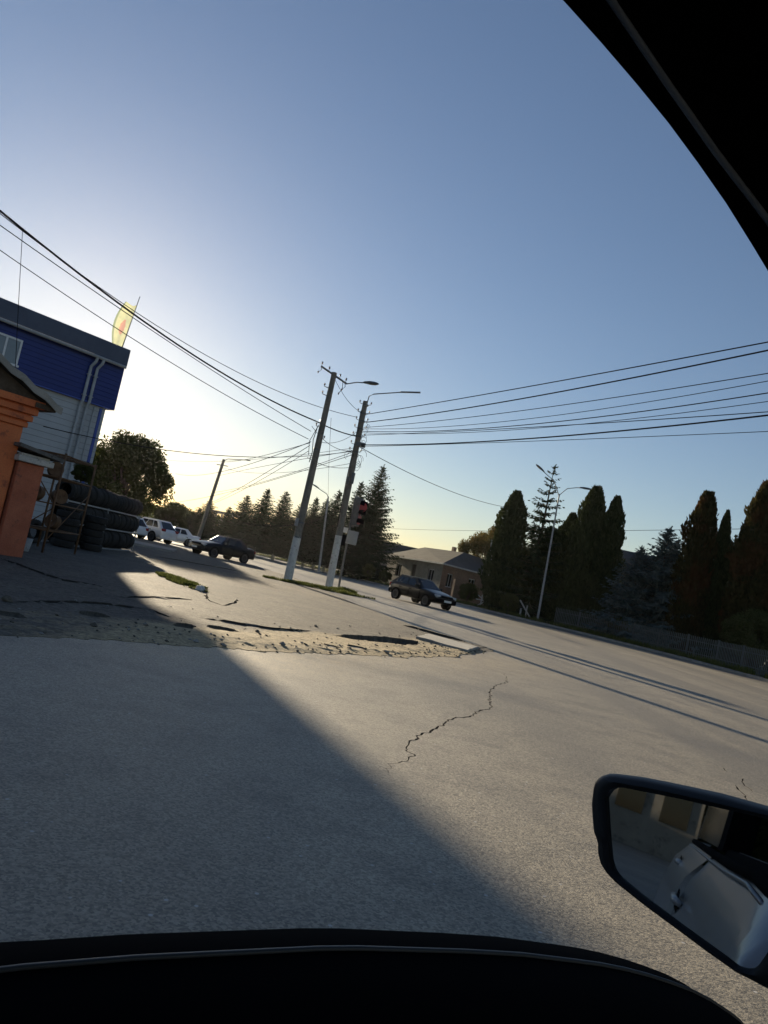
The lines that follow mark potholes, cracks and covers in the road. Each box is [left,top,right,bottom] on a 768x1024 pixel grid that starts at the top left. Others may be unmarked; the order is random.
crack [387,676,508,773]
pothole [335,634,421,645]
